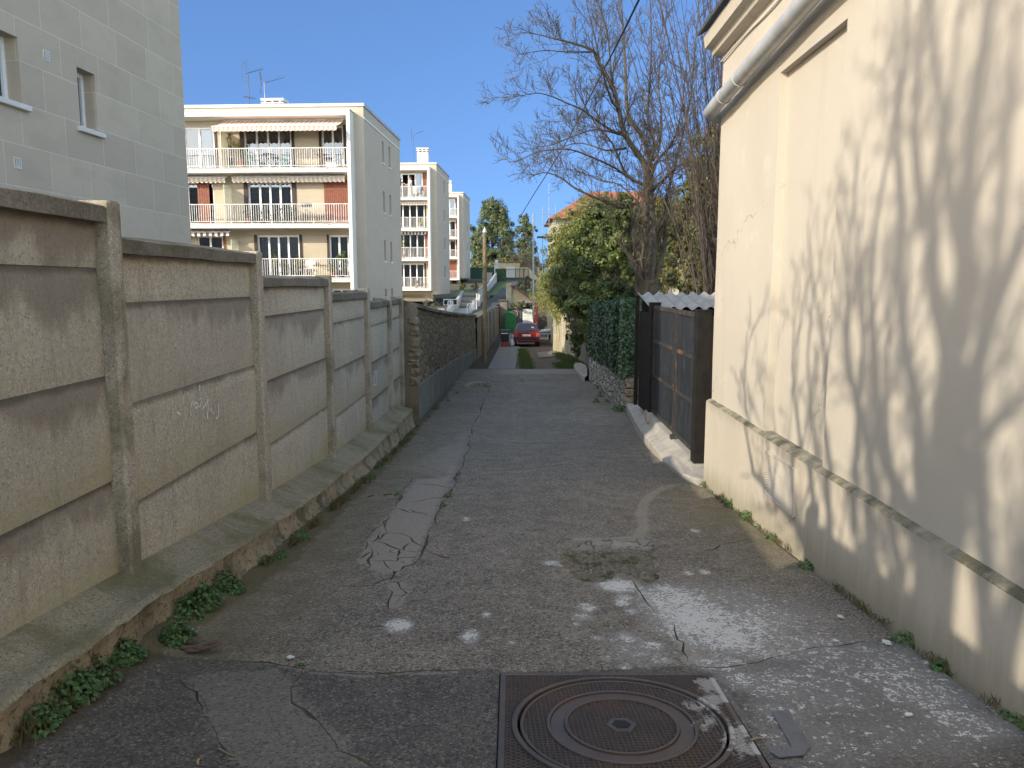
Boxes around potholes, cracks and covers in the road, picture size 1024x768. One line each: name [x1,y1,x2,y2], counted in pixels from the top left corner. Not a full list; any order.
pothole [558,538,662,583]
manhole cover [497,672,770,768]
crack [345,387,637,609]
crack [633,581,688,660]
crack [134,663,242,768]
crack [290,673,373,768]
